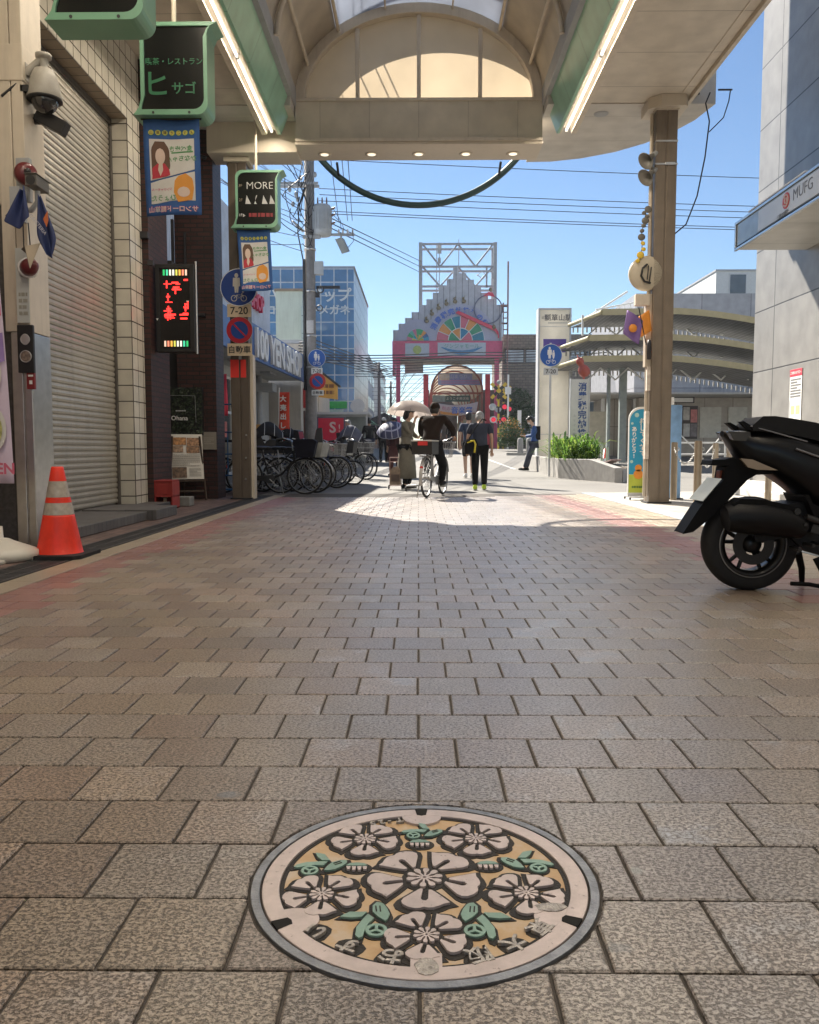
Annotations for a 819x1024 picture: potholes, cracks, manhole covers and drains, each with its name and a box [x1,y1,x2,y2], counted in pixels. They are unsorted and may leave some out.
manhole cover [250,805,600,992]
